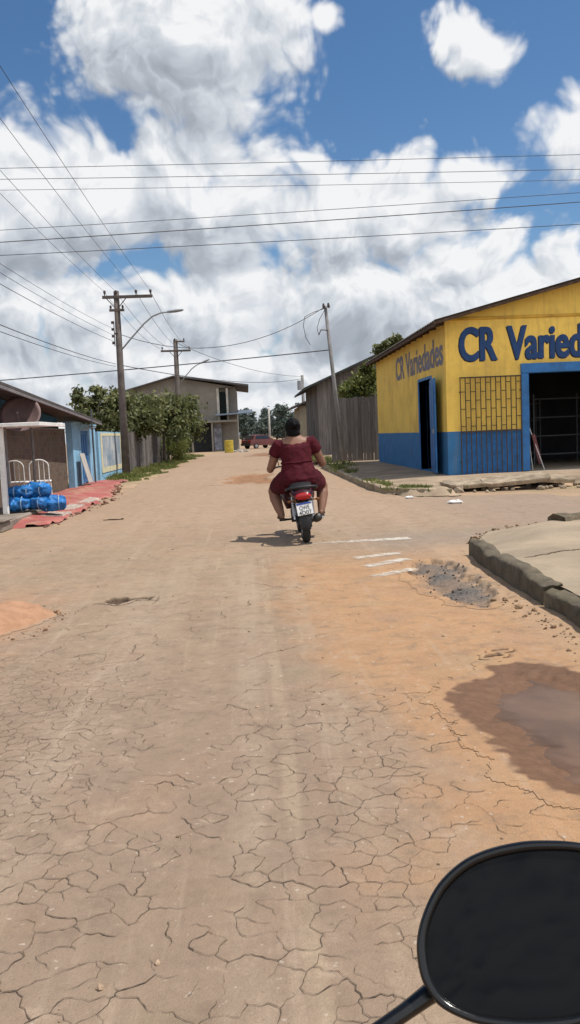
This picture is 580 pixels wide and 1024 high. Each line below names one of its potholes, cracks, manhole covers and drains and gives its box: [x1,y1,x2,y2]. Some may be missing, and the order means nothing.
crack [0,587,570,1024]
pothole [392,556,517,610]
pothole [97,595,159,606]
